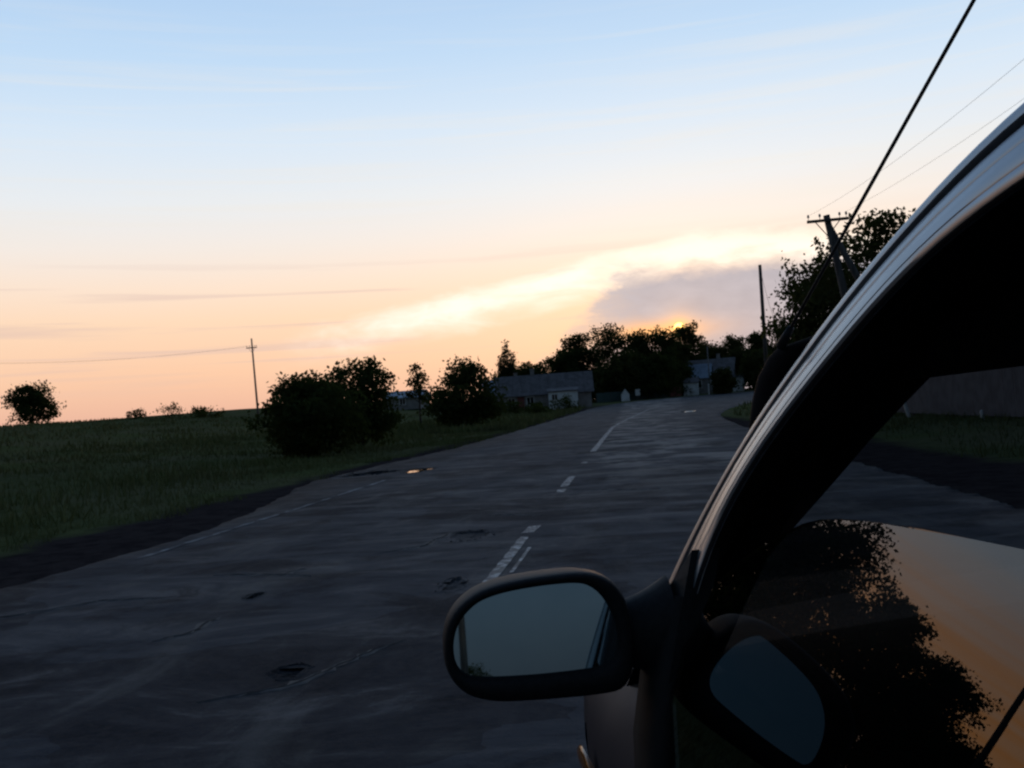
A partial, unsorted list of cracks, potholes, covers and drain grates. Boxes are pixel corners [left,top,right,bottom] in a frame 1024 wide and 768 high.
crack [376,531,453,554]
crack [0,596,406,703]
pothole [434,575,472,594]
pothole [241,592,268,601]
pothole [332,469,407,479]
pothole [266,662,316,681]
pothole [445,529,495,544]
